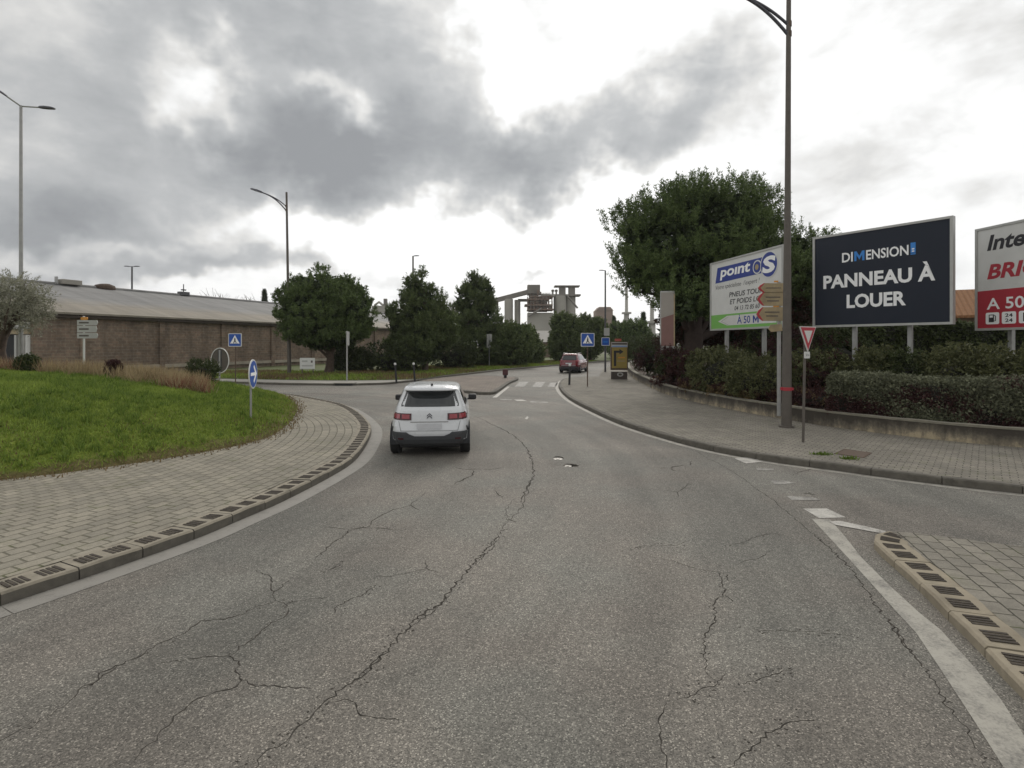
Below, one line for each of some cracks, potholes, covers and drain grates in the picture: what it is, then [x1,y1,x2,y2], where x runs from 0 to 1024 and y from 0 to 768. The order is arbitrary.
manhole cover [834,449,871,458]
crack [622,537,795,768]
crack [711,709,827,768]
crack [332,560,439,613]
crack [0,571,326,759]
crack [739,626,859,639]
crack [314,494,424,574]
